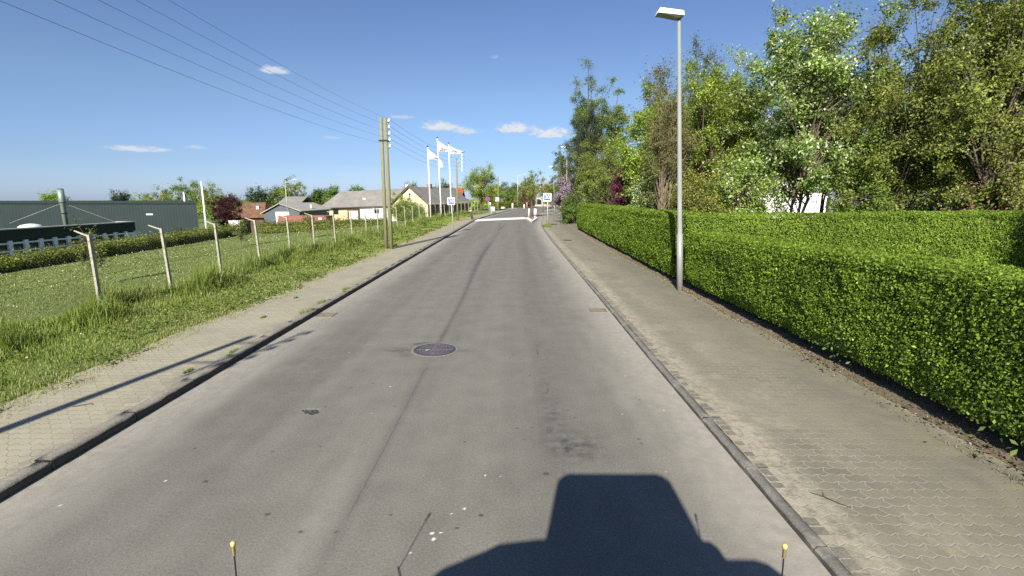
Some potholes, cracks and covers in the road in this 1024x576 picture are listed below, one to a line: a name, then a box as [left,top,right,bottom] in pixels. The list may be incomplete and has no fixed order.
manhole cover [411,343,458,357]
